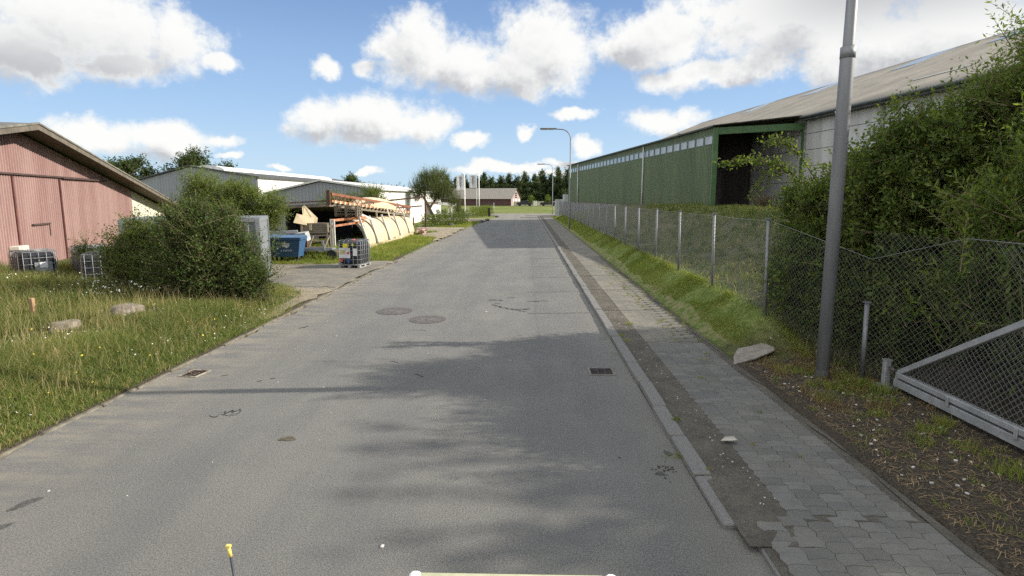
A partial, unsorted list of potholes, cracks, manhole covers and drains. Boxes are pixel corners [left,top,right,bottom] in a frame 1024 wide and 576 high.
drain grate [178,368,212,378]
manhole cover [409,315,446,323]
drain grate [587,367,616,376]
